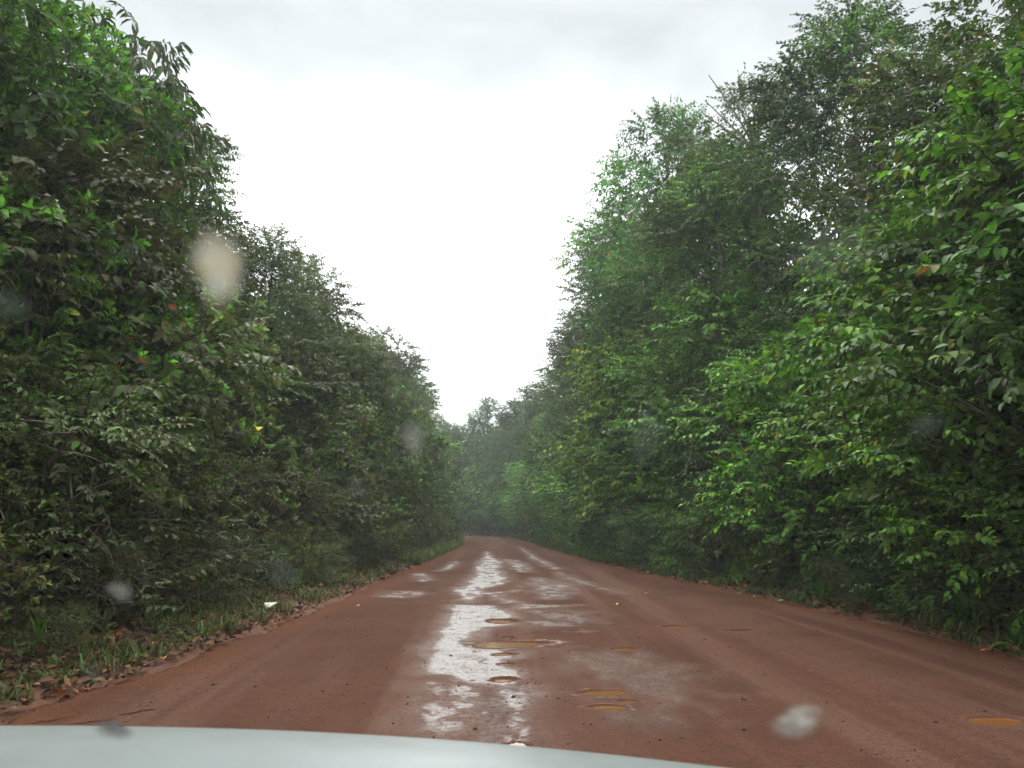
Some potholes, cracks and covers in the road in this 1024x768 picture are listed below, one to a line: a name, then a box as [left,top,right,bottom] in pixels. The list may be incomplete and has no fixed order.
pothole [580,703,631,711]
pothole [957,715,1024,728]
pothole [463,640,557,649]
pothole [567,689,633,697]
